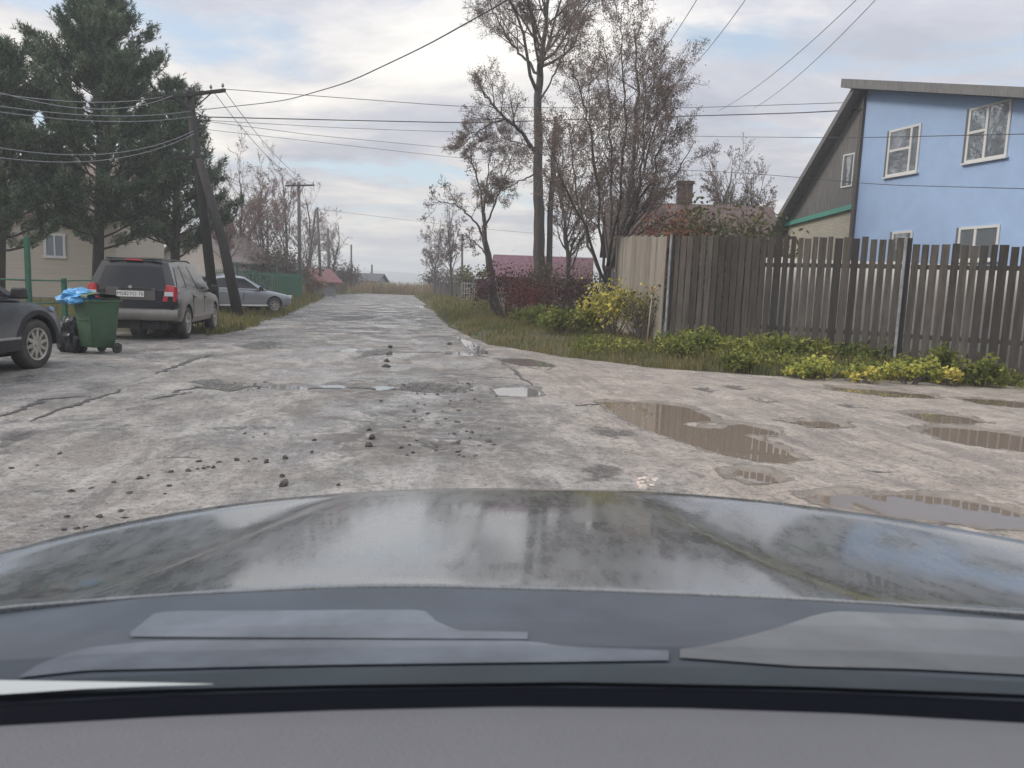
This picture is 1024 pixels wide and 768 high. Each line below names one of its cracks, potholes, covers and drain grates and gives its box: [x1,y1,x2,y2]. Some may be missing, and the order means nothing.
pothole [907,423,1024,452]
pothole [402,382,469,393]
crack [153,354,467,399]
pothole [193,379,245,391]
crack [334,350,533,386]
pothole [714,463,795,485]
pothole [792,486,1024,532]
pothole [900,409,996,425]
pothole [494,357,557,370]
pothole [592,399,814,464]
pothole [456,338,493,355]
crack [0,389,121,421]
